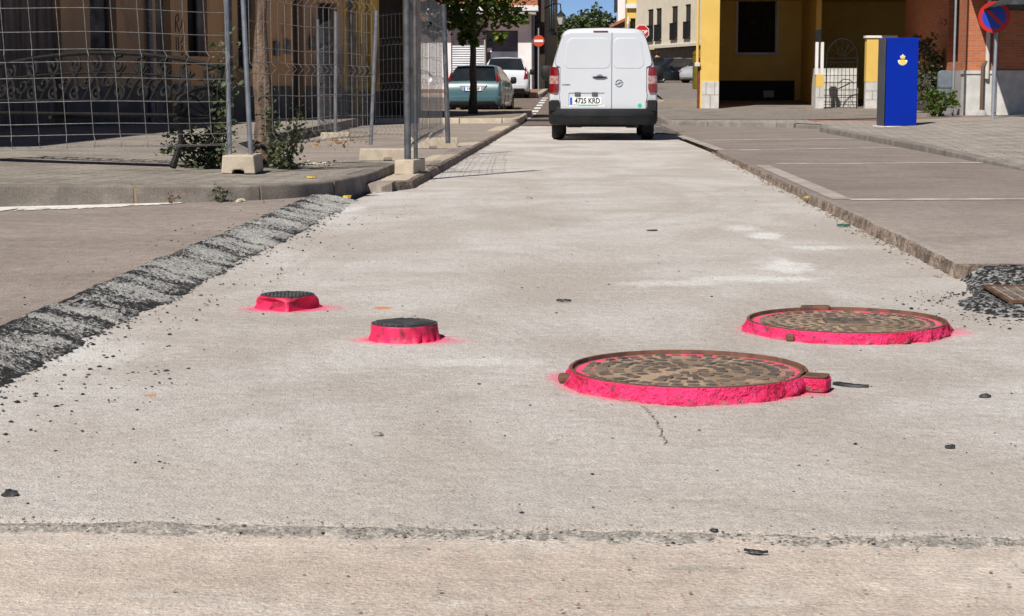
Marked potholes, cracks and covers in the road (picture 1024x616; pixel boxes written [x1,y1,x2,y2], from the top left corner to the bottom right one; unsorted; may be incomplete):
crack [640,405,668,445]
manhole cover [742,305,954,345]
manhole cover [368,317,442,344]
manhole cover [254,290,321,312]
manhole cover [558,350,831,407]
